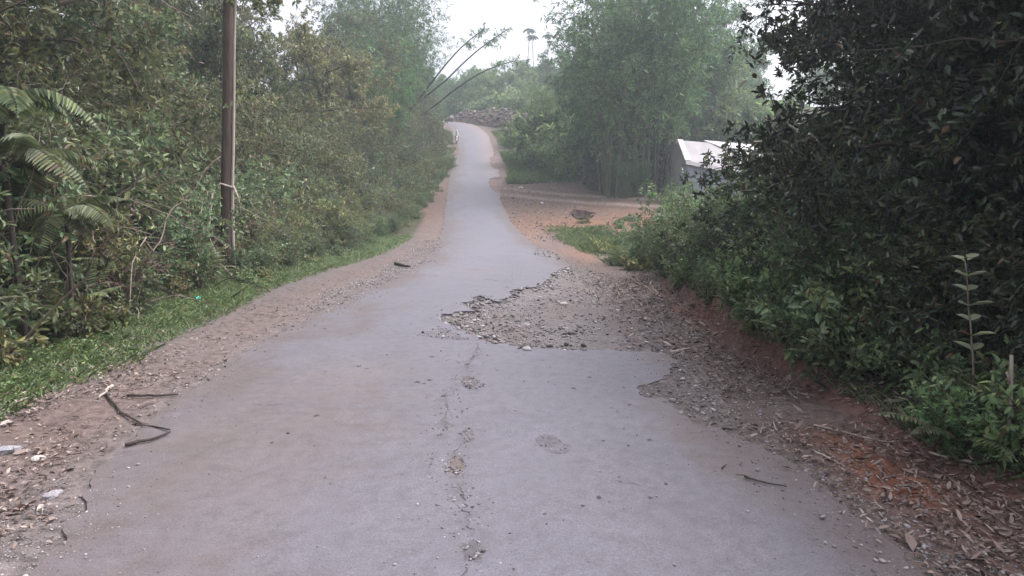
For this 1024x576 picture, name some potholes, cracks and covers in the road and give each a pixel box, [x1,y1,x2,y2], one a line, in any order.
pothole [444,455,466,479]
pothole [458,540,487,562]
pothole [535,434,572,453]
pothole [441,267,702,354]
pothole [458,376,483,390]
